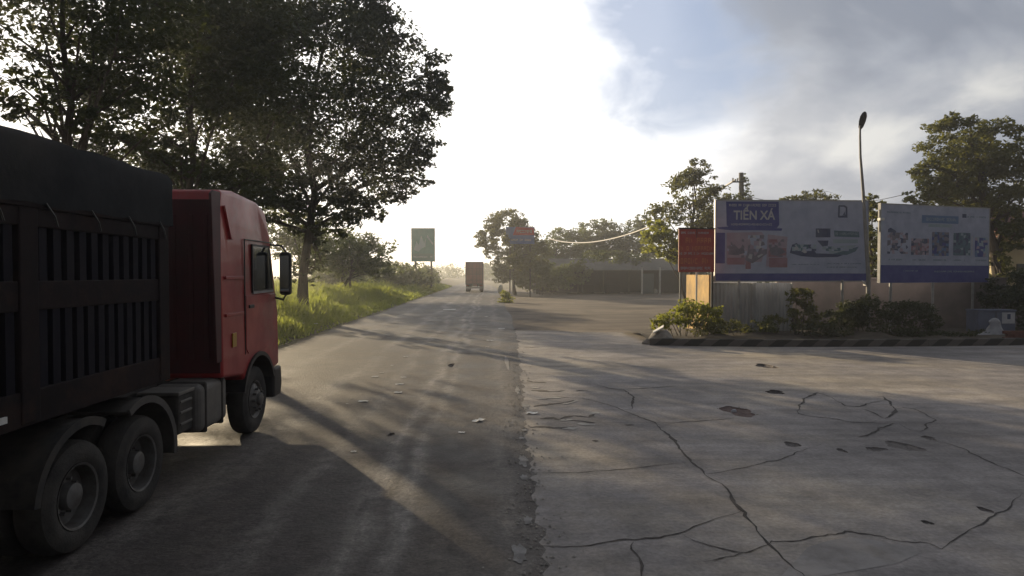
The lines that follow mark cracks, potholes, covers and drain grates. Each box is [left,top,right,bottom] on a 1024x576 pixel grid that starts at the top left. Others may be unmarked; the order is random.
crack [527,380,1023,576]
pothole [717,406,758,417]
pothole [885,441,926,451]
